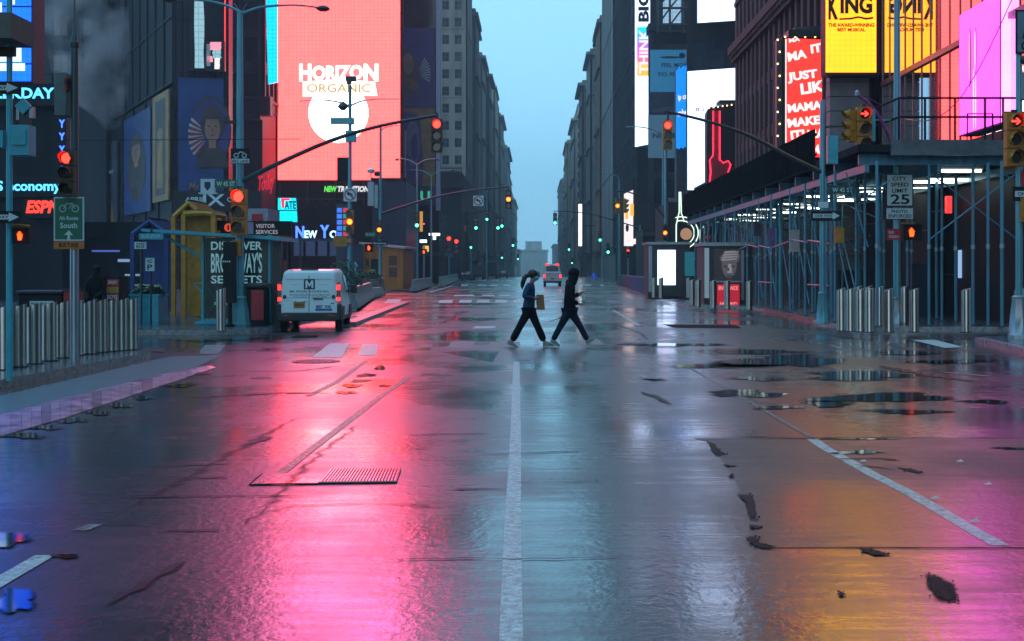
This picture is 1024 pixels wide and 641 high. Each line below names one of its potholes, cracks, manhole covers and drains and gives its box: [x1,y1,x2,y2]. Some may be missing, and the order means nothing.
pothole [920,572,960,602]
pothole [861,547,890,555]
pothole [738,493,760,520]
crack [246,436,271,445]
pothole [746,535,776,549]
drain grate [319,468,401,484]
